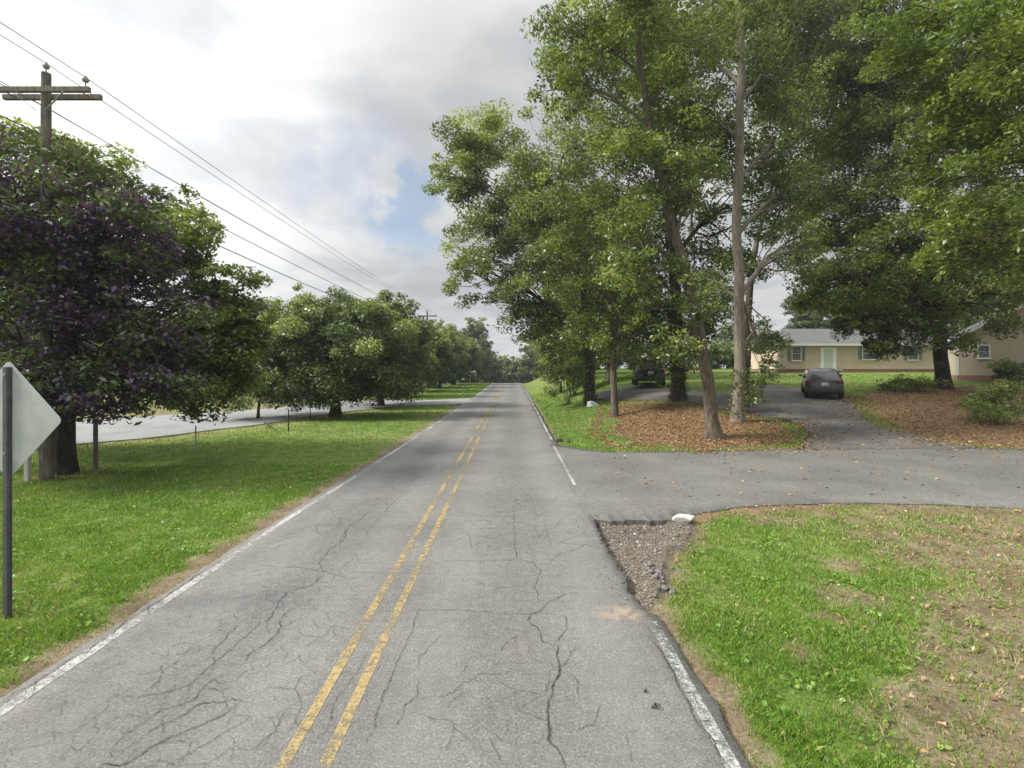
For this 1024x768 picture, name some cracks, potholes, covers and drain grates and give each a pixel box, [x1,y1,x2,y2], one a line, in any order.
crack [3,545,357,768]
pothole [580,510,698,612]
crack [303,455,603,768]
